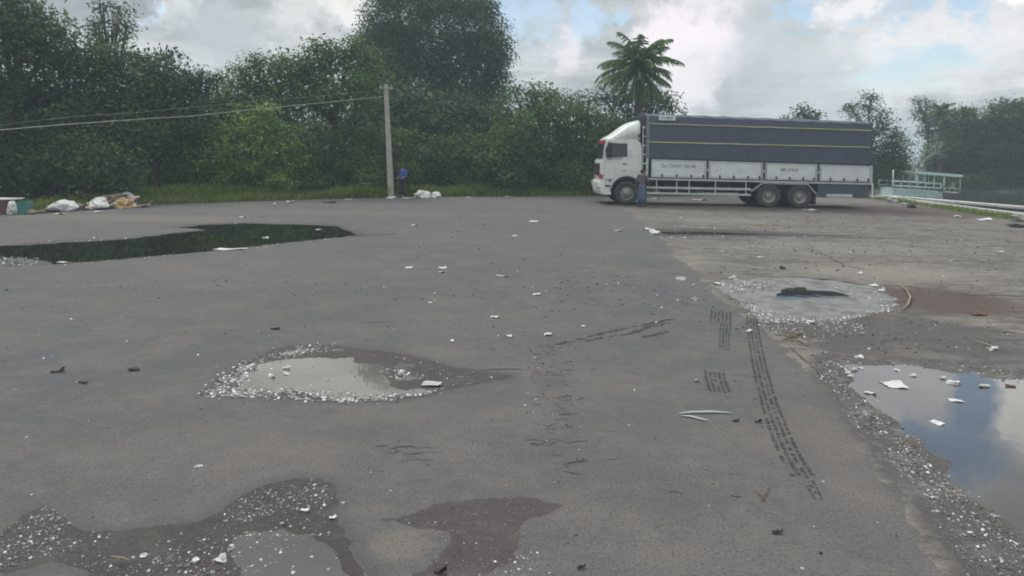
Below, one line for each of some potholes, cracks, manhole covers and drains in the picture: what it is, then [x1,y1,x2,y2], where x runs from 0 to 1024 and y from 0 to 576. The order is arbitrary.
pothole [0,478,365,576]
pothole [810,353,1024,576]
crack [377,445,432,465]
pothole [709,277,900,340]
pothole [195,342,512,405]
pothole [0,222,367,268]
